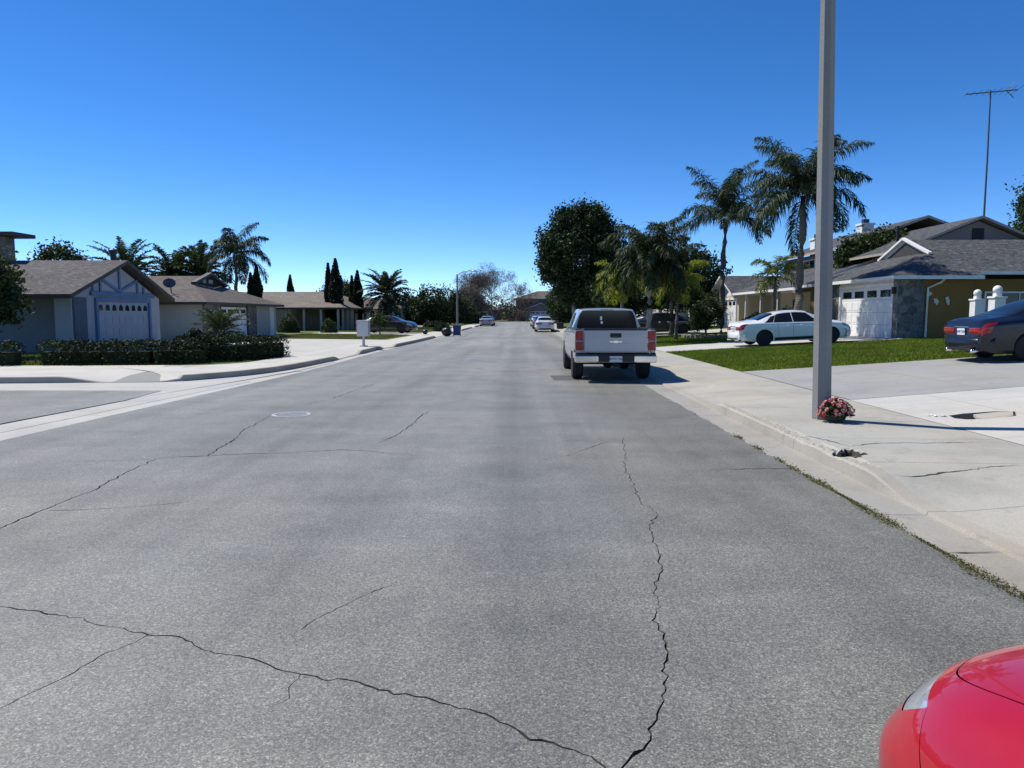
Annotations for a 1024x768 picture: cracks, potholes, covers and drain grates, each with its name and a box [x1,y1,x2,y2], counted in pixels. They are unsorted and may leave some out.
crack [0,436,669,768]
crack [899,465,1013,477]
crack [1,412,428,528]
